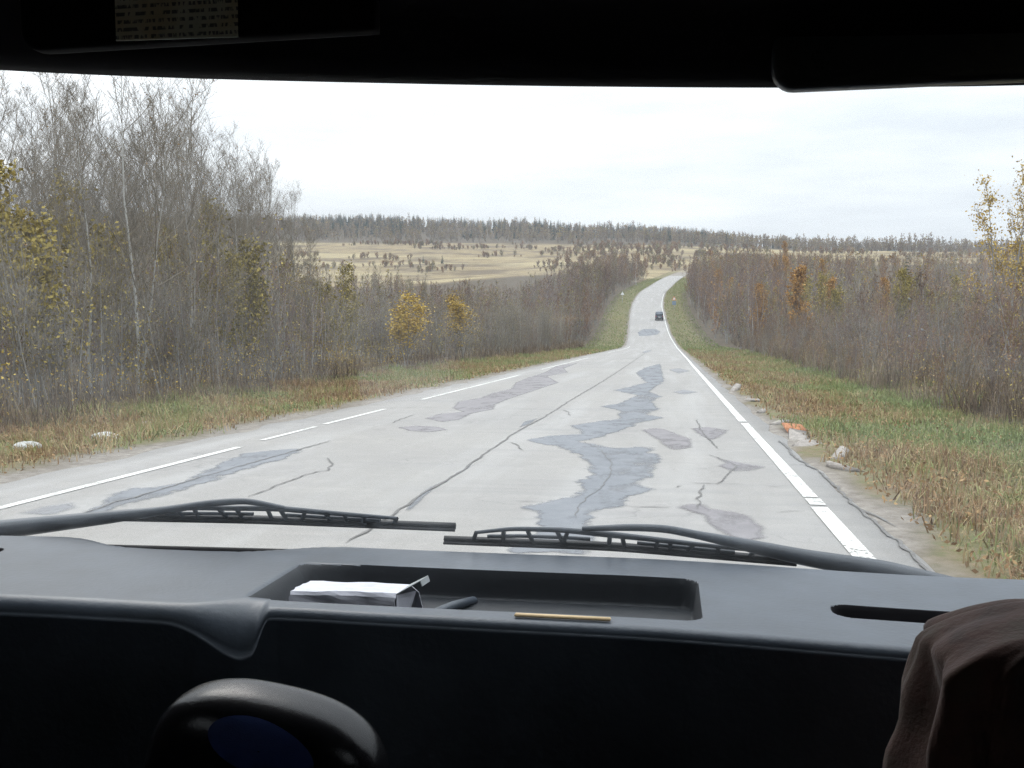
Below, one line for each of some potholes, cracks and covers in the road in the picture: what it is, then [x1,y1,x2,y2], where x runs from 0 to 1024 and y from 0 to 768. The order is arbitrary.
crack [677,412,738,508]
crack [83,441,334,513]
crack [347,353,645,542]
crack [767,440,932,572]
